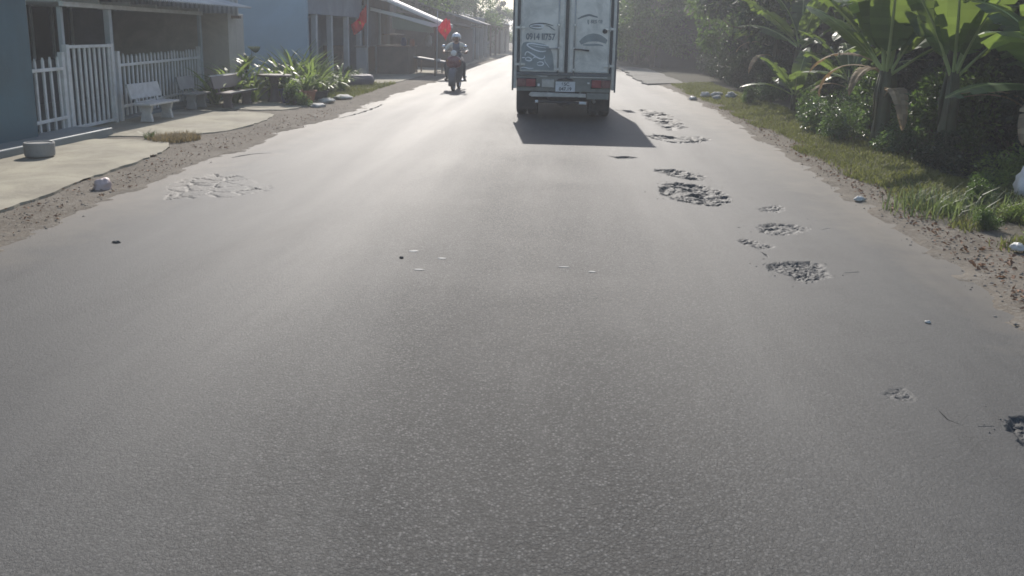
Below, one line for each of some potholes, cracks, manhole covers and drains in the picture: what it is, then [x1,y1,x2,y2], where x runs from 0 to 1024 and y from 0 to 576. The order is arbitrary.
pothole [877,386,918,403]
pothole [982,415,1024,447]
pothole [657,182,733,207]
pothole [756,205,787,213]
pothole [737,238,777,250]
pothole [653,169,707,181]
pothole [749,258,844,287]
pothole [739,220,811,236]
